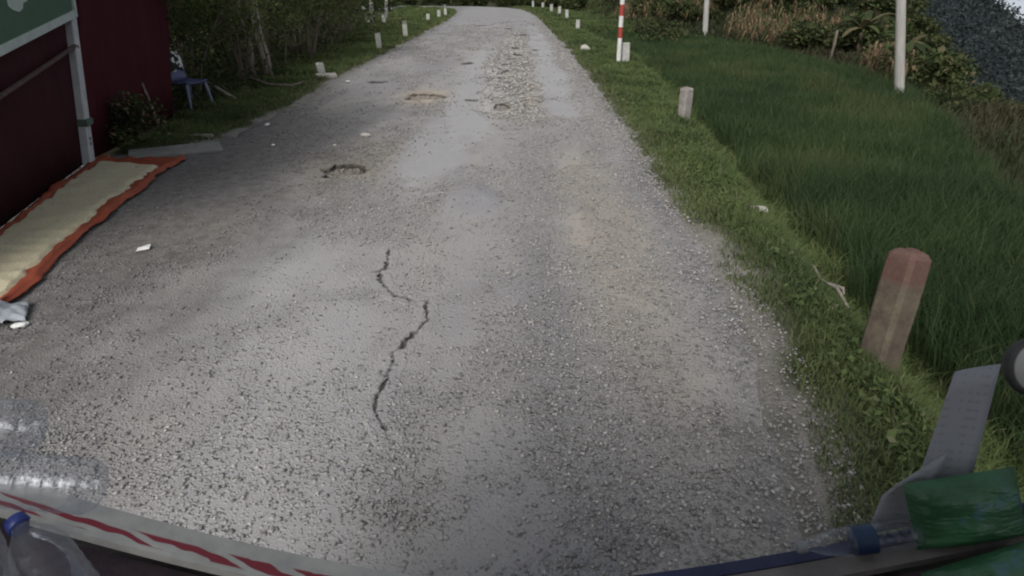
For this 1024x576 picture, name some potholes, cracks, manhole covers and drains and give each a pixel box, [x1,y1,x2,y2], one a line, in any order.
pothole [397,92,456,102]
pothole [484,101,518,113]
pothole [313,162,378,181]
crack [347,244,443,449]
